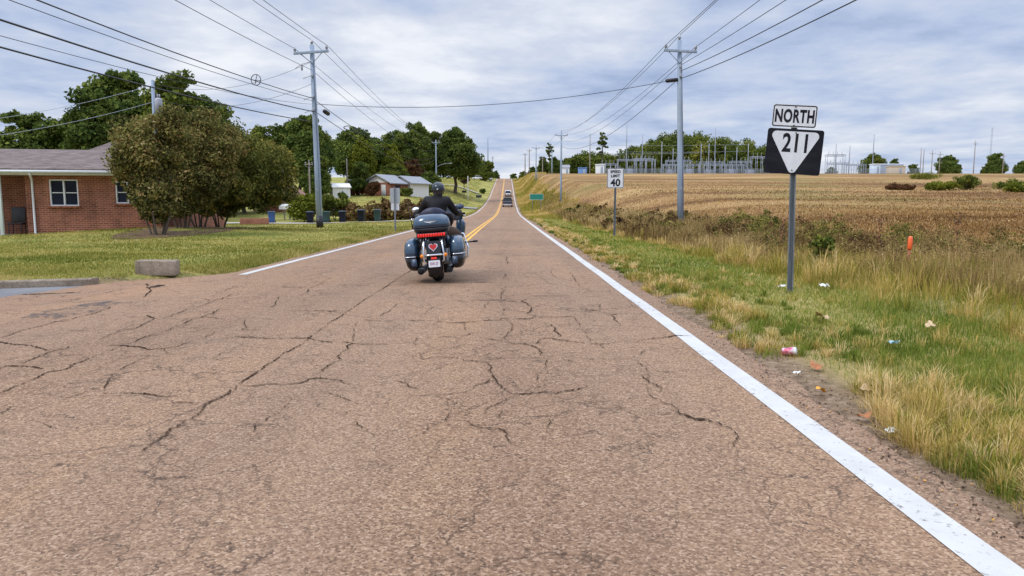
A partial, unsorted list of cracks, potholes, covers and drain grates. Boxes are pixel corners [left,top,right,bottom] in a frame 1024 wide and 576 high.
crack [357,258,739,445]
crack [0,284,391,435]
